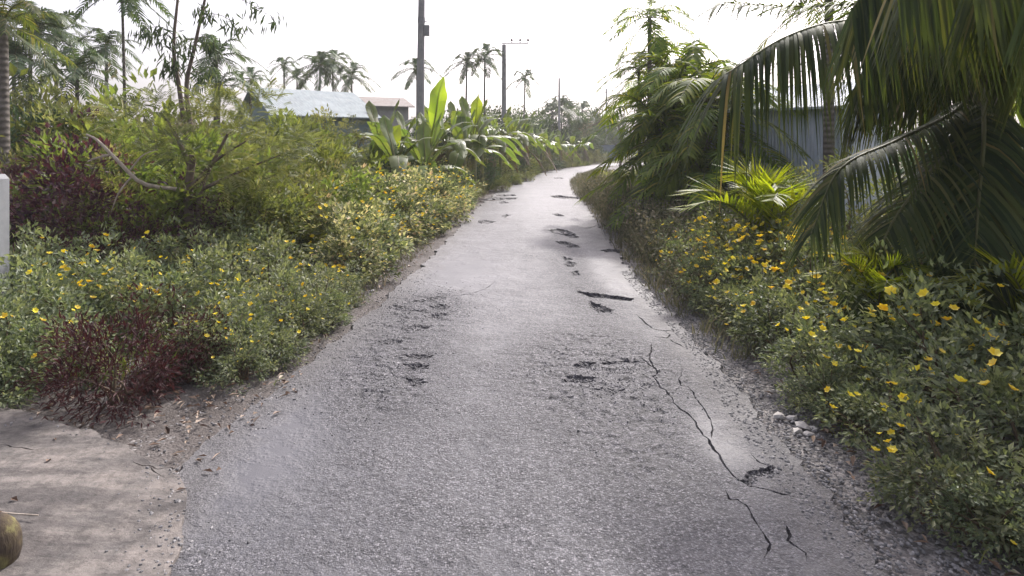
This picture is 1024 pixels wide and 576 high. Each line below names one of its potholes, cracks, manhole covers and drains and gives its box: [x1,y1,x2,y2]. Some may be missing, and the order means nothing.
pothole [590,301,614,313]
pothole [577,291,634,301]
pothole [411,296,446,304]
pothole [740,465,779,486]
pothole [386,305,423,313]
pothole [563,374,597,384]
crack [638,316,808,565]
pothole [549,228,578,238]
